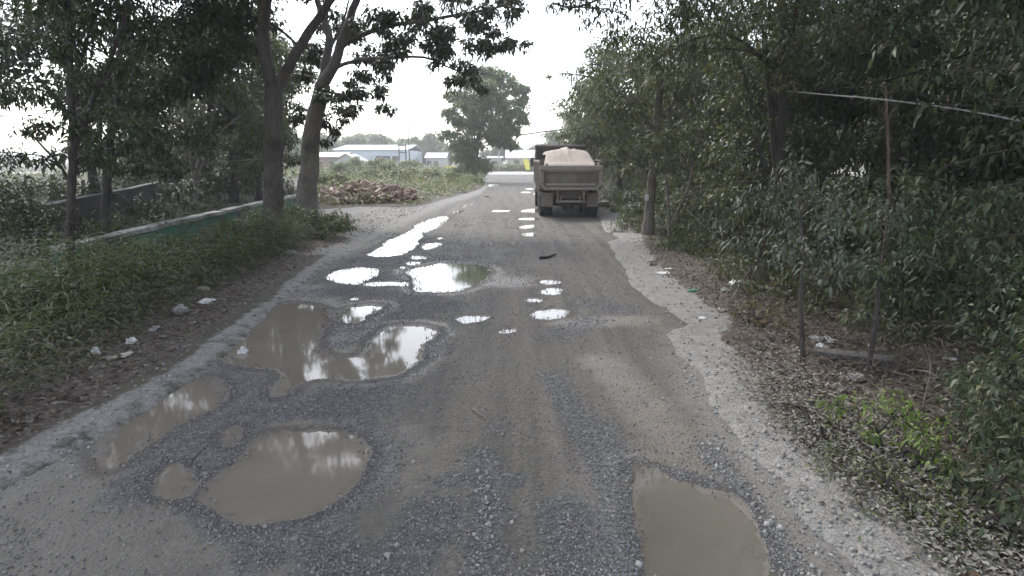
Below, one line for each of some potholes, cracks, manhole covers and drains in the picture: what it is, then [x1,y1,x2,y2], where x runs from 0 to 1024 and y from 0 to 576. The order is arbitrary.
pothole [406,263,493,293]
pothole [221,425,244,447]
pothole [323,267,379,285]
pothole [150,462,202,500]
pothole [217,302,440,397]
pothole [91,375,231,471]
pothole [631,464,771,576]
pothole [367,216,448,257]
pothole [528,308,570,320]
pothole [197,429,372,526]
pothole [454,314,492,323]
